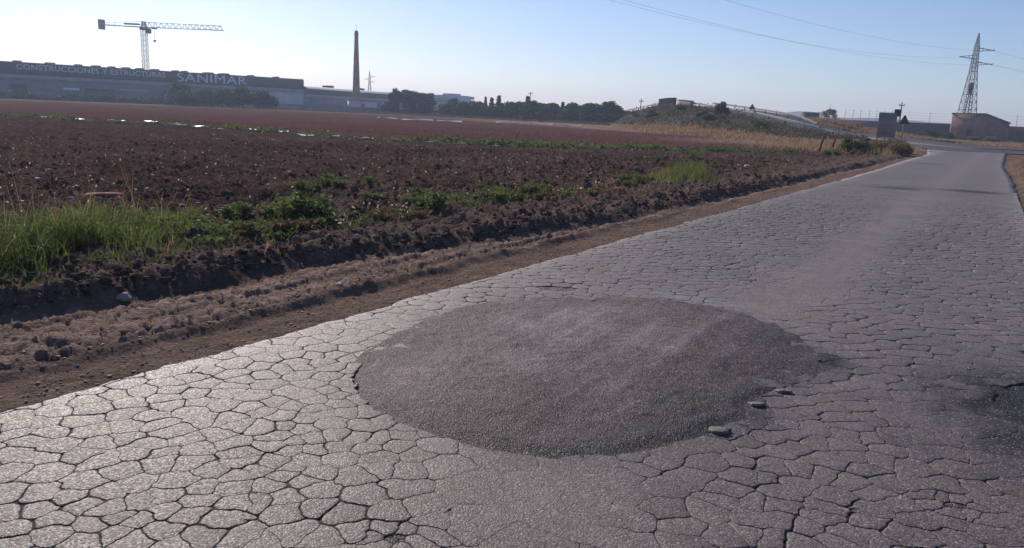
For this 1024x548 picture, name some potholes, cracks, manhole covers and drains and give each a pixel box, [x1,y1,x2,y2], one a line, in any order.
crack [402,198,1024,548]
